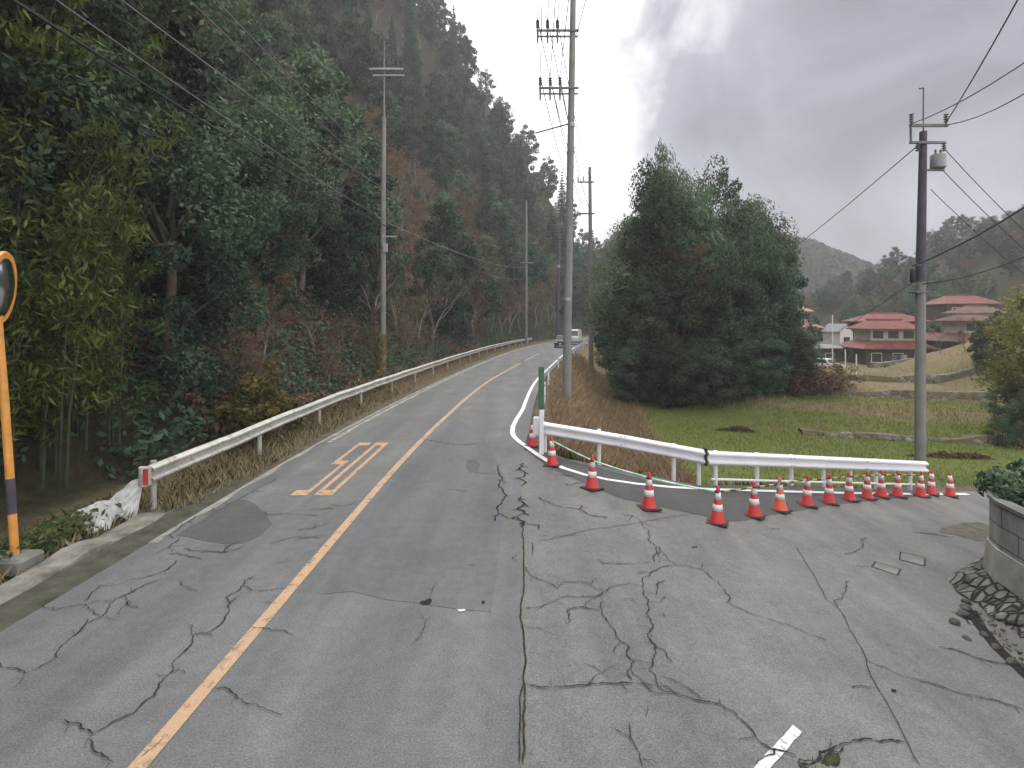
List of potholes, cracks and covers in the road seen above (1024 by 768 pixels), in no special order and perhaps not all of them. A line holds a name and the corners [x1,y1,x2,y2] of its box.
utility cover [871,561,902,575]
crack [876,664,1022,713]
crack [940,646,1008,664]
crack [492,463,907,765]
crack [64,576,293,768]
utility cover [899,552,926,566]
crack [0,478,275,688]
